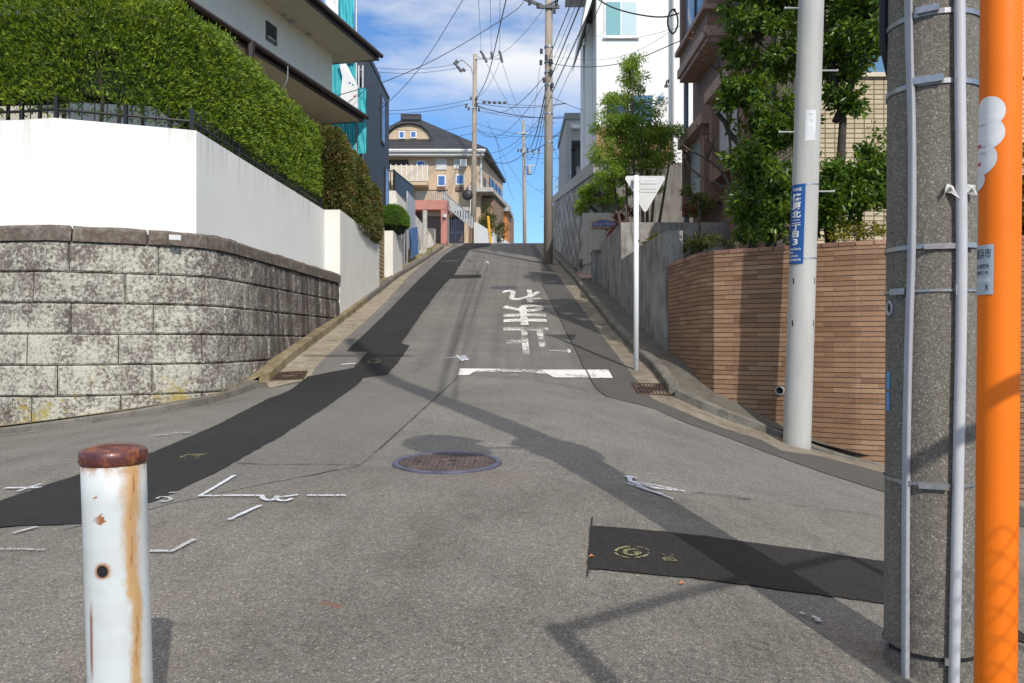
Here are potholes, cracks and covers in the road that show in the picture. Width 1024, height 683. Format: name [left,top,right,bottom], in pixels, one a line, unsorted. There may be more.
manhole cover [392,451,502,474]
drain grate [270,370,308,381]
drain grate [631,383,672,396]
